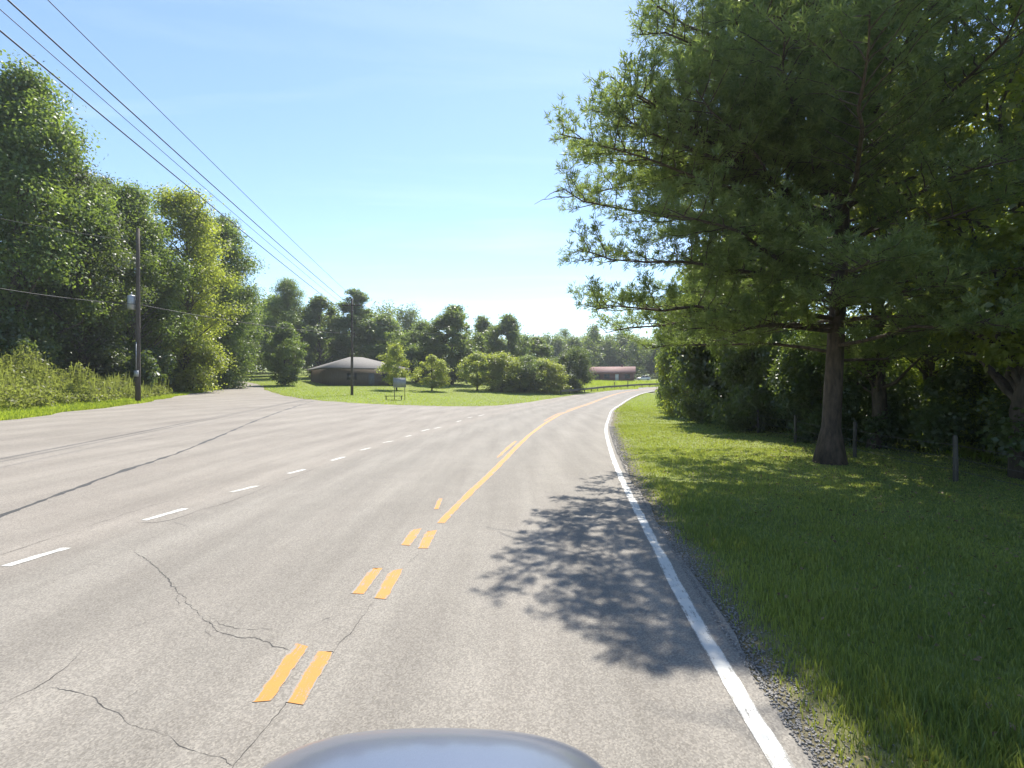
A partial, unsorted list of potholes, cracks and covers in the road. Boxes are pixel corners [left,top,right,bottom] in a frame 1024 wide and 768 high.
crack [0,555,417,768]
